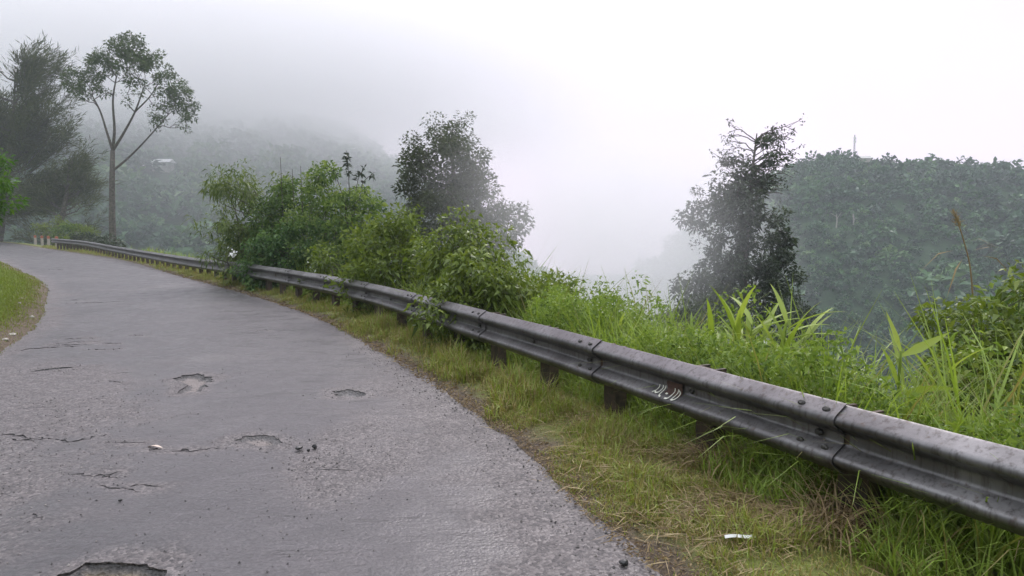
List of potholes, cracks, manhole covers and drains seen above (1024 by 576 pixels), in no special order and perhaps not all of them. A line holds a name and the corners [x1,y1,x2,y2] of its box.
pothole [57,562,167,576]
crack [68,472,158,492]
crack [24,335,143,350]
pothole [173,373,214,394]
pothole [235,435,283,447]
pothole [332,389,366,397]
crack [2,433,218,452]
